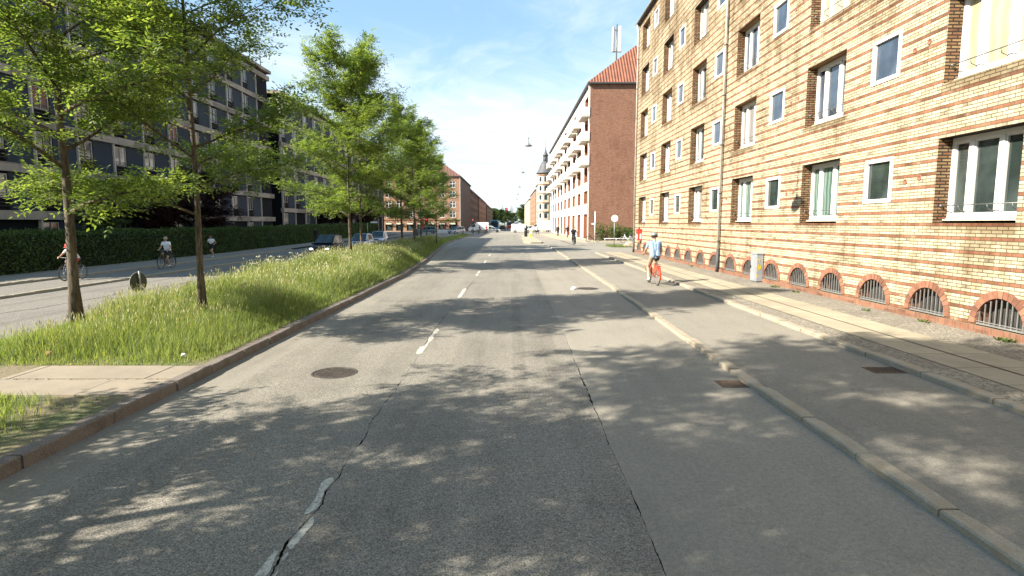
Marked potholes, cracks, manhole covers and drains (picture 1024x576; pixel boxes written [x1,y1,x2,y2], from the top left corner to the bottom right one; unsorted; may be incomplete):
crack [270,280,474,576]
drain grate [714,380,749,388]
manhole cover [311,367,358,379]
